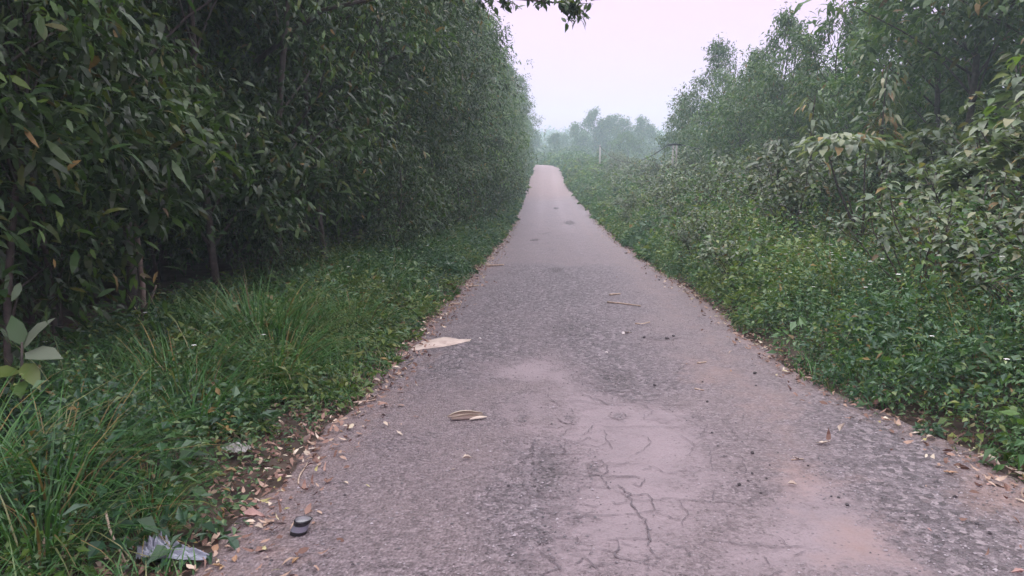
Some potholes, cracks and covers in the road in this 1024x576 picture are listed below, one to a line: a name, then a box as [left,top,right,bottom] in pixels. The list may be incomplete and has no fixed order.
crack [526,394,810,576]
